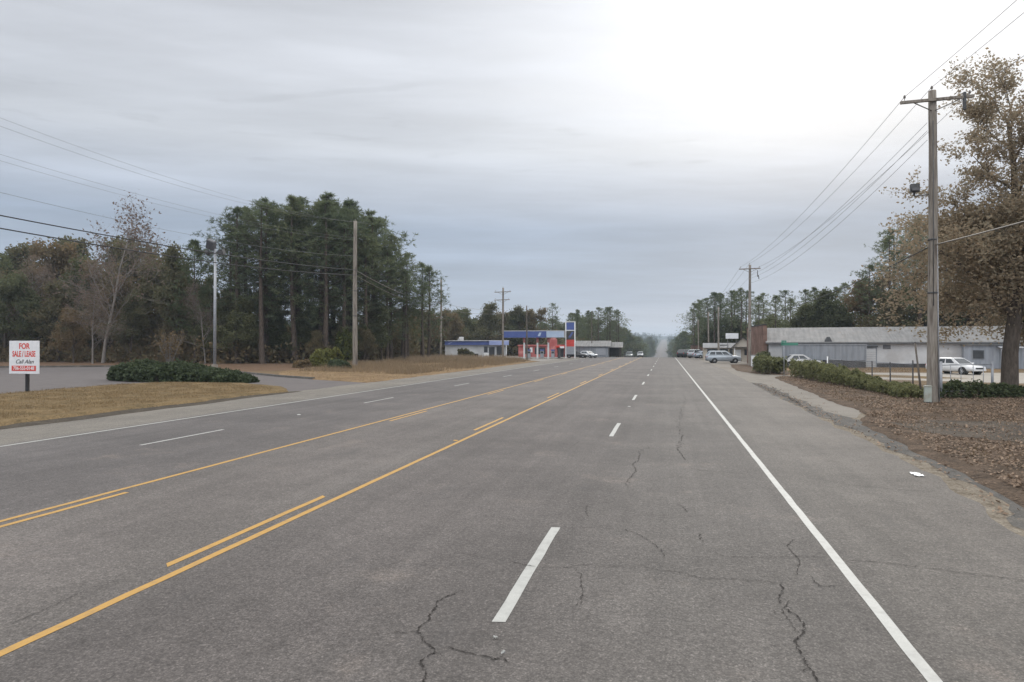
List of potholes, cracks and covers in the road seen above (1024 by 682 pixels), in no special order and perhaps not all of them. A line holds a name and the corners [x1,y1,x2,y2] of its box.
crack [363,589,509,682]
crack [562,510,831,682]
